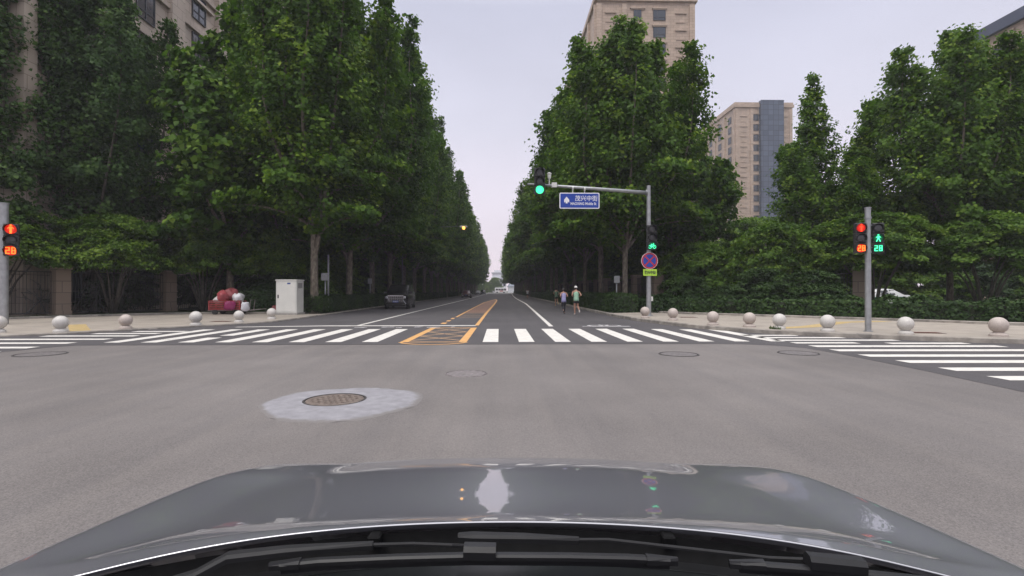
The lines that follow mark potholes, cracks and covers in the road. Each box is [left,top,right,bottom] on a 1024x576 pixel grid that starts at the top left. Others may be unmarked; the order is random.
manhole cover [258,388,423,423]
